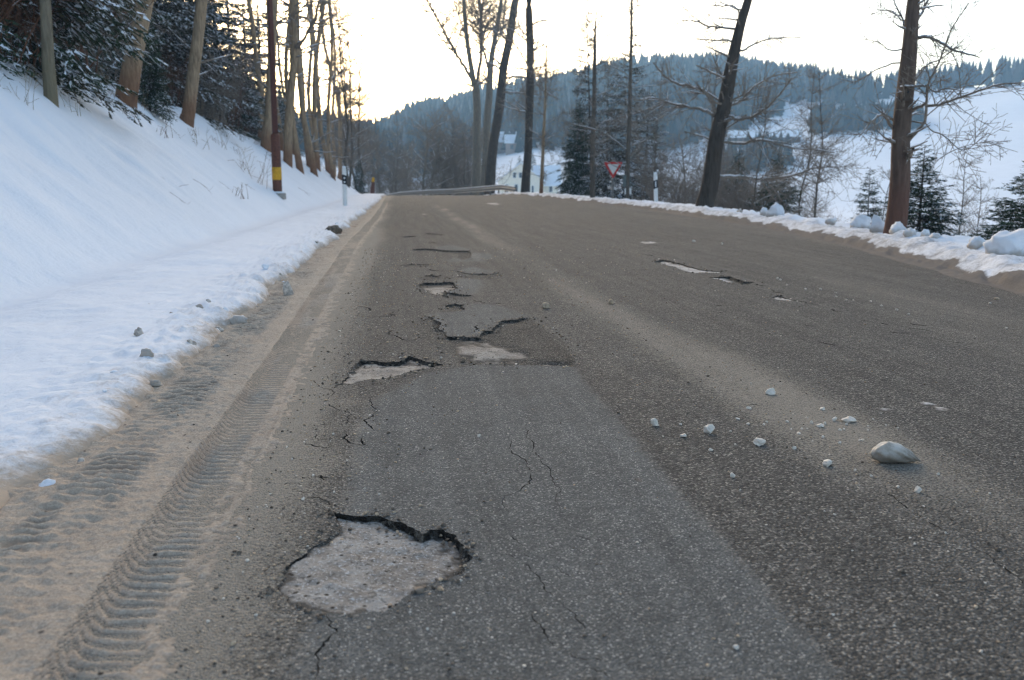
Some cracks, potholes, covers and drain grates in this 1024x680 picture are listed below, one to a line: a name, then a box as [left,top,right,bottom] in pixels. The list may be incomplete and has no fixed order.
pothole [424,316,576,367]
pothole [278,514,473,615]
pothole [337,356,443,385]
crack [502,423,610,678]
crack [285,386,377,517]
pothole [654,260,725,273]
pothole [412,249,472,260]
pothole [709,276,753,285]
pothole [418,282,456,295]
crack [314,615,338,680]
